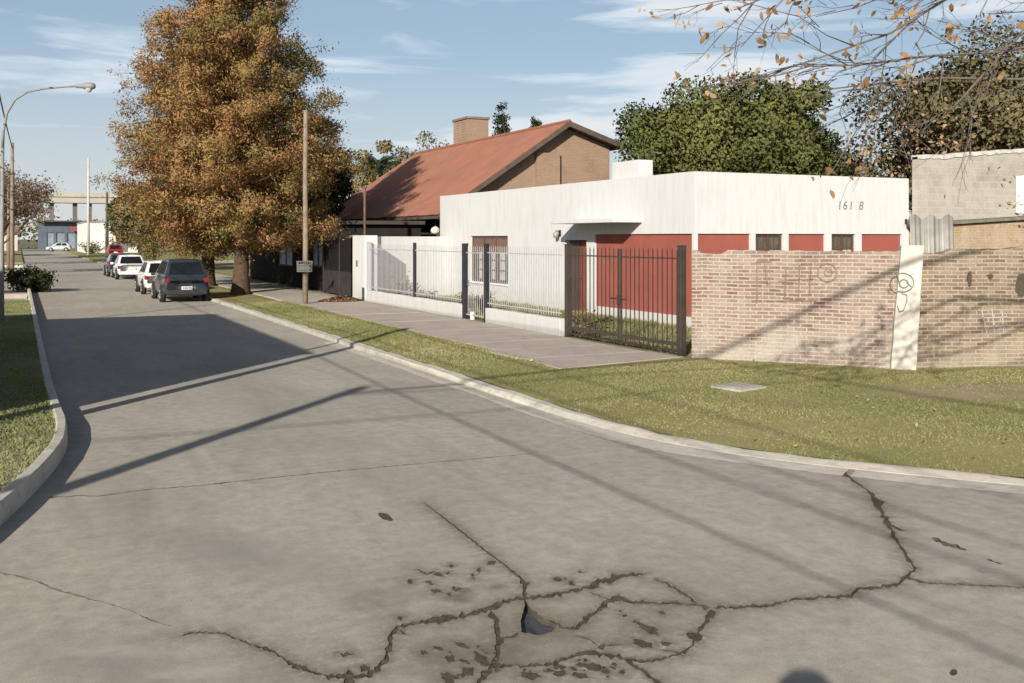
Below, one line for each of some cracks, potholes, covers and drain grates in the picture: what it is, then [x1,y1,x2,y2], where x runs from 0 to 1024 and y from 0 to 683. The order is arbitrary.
crack [49,453,533,498]
crack [0,471,1024,683]
utility cover [710,382,767,392]
pothole [520,600,557,635]
